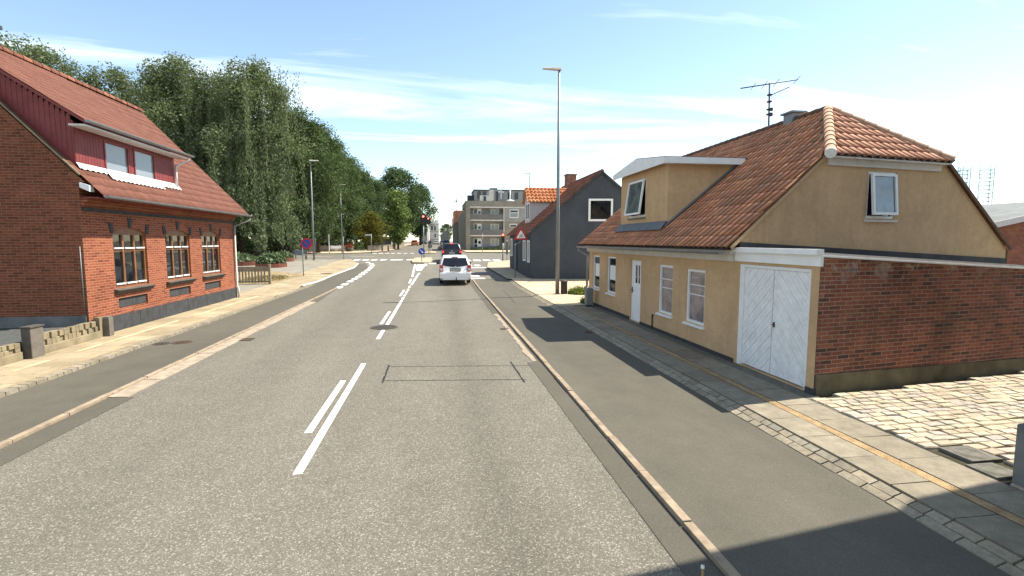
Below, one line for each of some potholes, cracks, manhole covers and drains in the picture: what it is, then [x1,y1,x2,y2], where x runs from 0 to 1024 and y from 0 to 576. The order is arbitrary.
manhole cover [965,462,1013,481]
manhole cover [938,445,1003,464]
